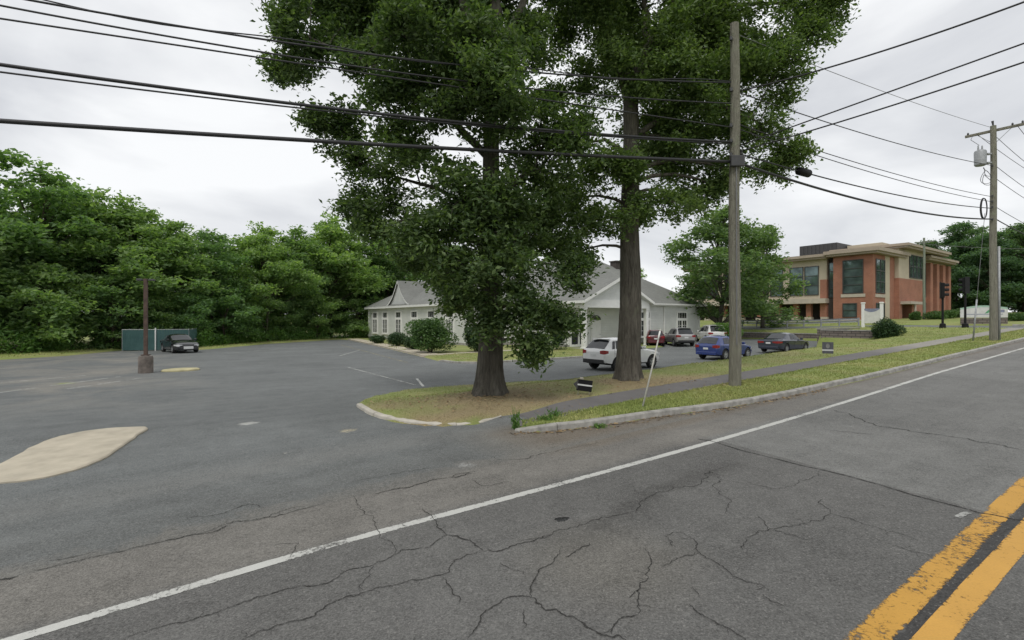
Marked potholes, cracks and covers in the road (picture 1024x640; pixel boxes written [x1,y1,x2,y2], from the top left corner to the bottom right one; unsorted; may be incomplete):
crack [0,504,319,580]
crack [831,410,1018,449]
crack [127,463,819,640]
